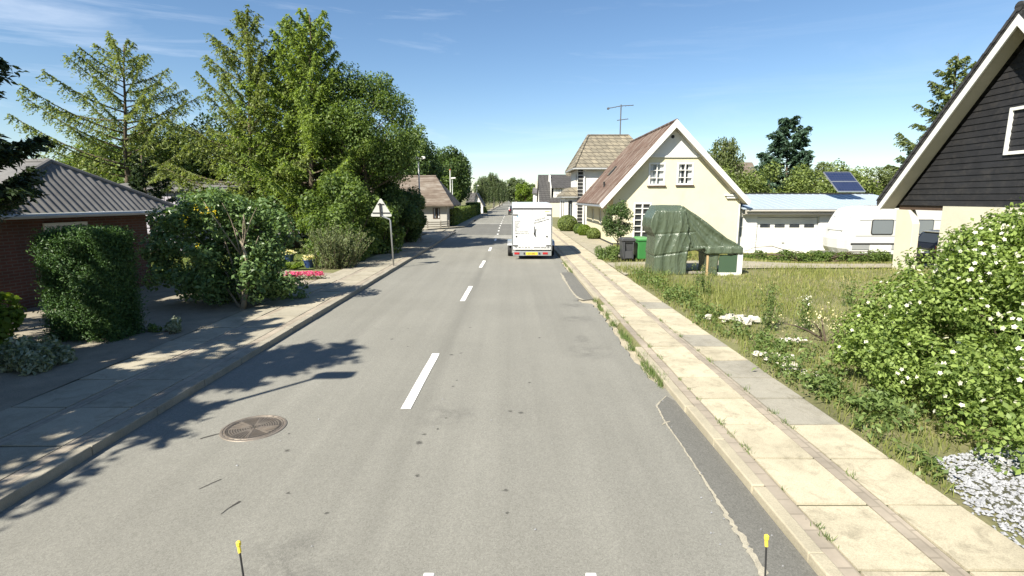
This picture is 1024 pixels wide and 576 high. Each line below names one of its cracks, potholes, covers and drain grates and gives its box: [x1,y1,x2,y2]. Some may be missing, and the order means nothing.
manhole cover [219,415,287,442]
